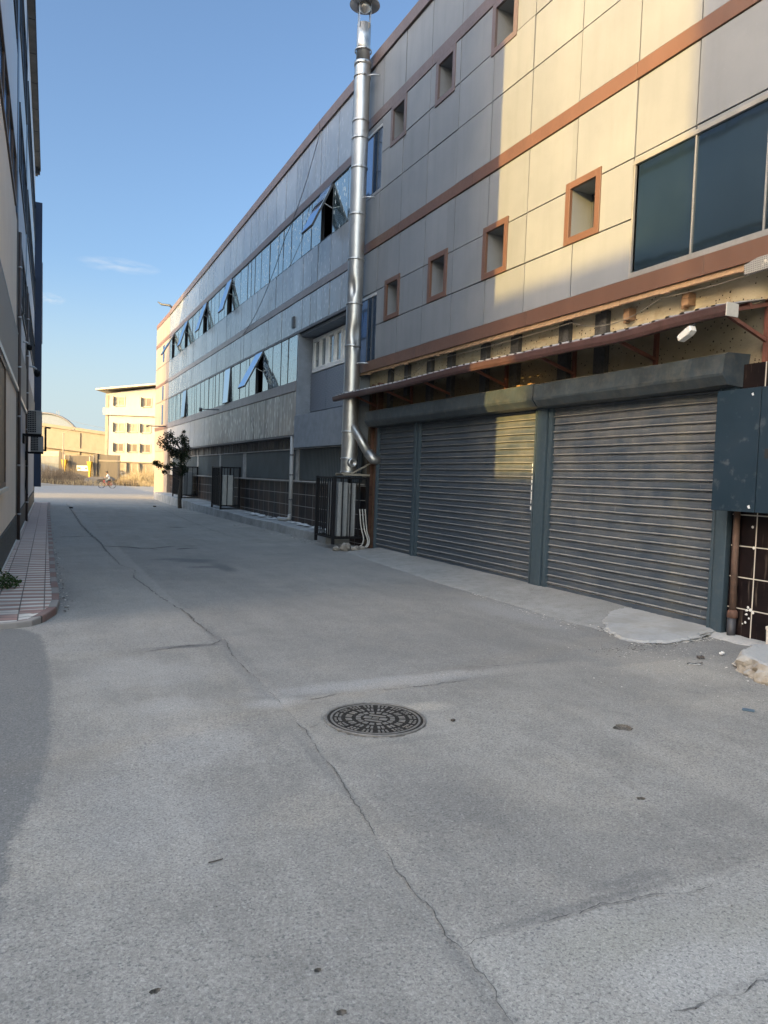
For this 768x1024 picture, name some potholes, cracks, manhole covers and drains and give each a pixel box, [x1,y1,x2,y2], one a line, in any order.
crack [682,979,768,1010]
crack [386,852,714,1023]
manhole cover [324,702,426,738]
crack [68,506,274,695]
crack [274,662,536,845]
